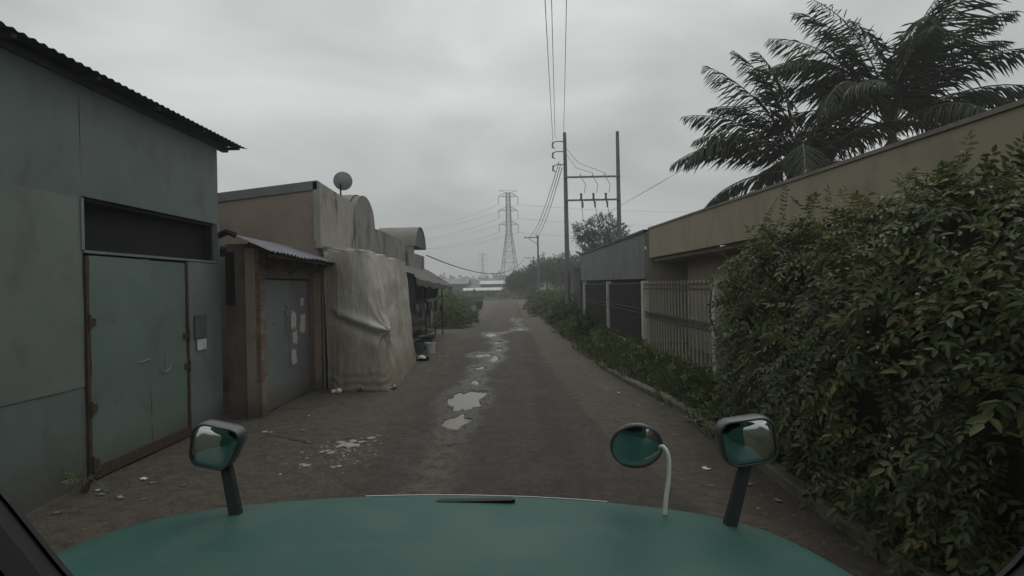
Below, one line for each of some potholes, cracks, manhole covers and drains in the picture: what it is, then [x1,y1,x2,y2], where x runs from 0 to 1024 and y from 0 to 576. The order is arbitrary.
pothole [440,413,473,430]
pothole [447,390,488,411]
crack [260,433,386,459]
